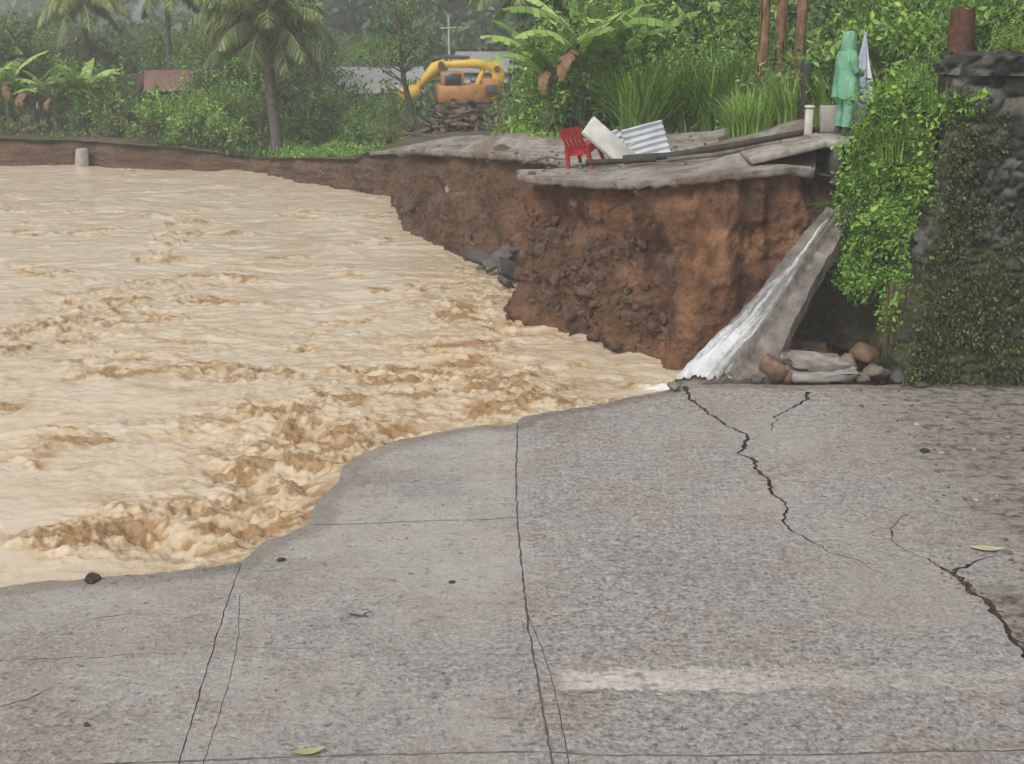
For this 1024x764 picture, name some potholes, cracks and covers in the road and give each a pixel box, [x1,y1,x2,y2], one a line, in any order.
crack [683,387,902,577]
crack [890,513,1024,658]
